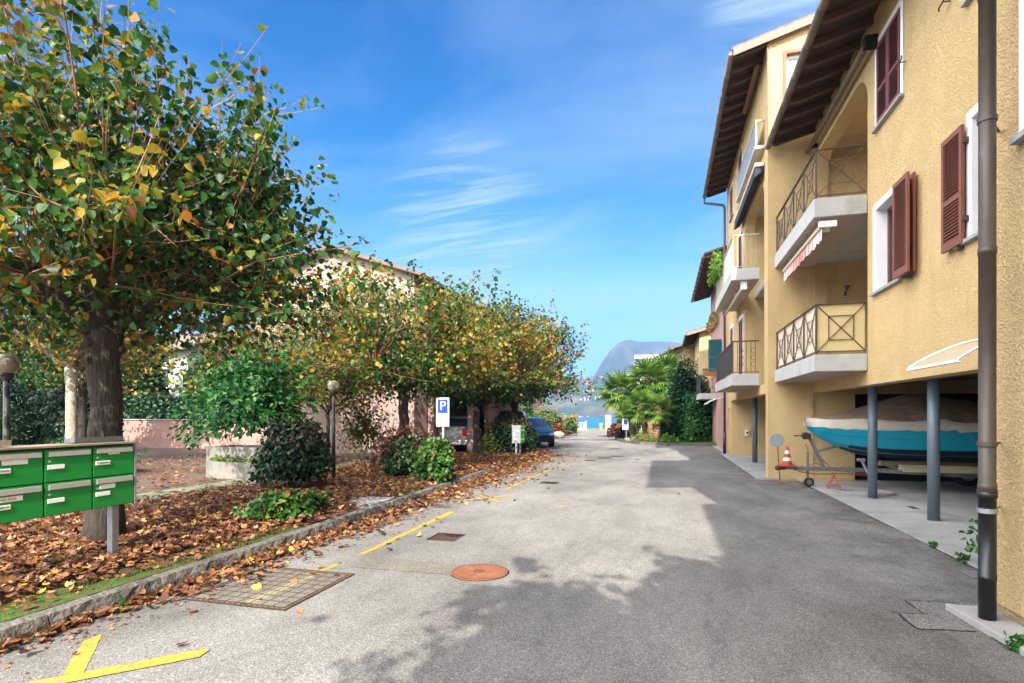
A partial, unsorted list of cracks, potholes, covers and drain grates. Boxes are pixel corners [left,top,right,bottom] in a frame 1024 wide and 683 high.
manhole cover [451,564,509,581]
